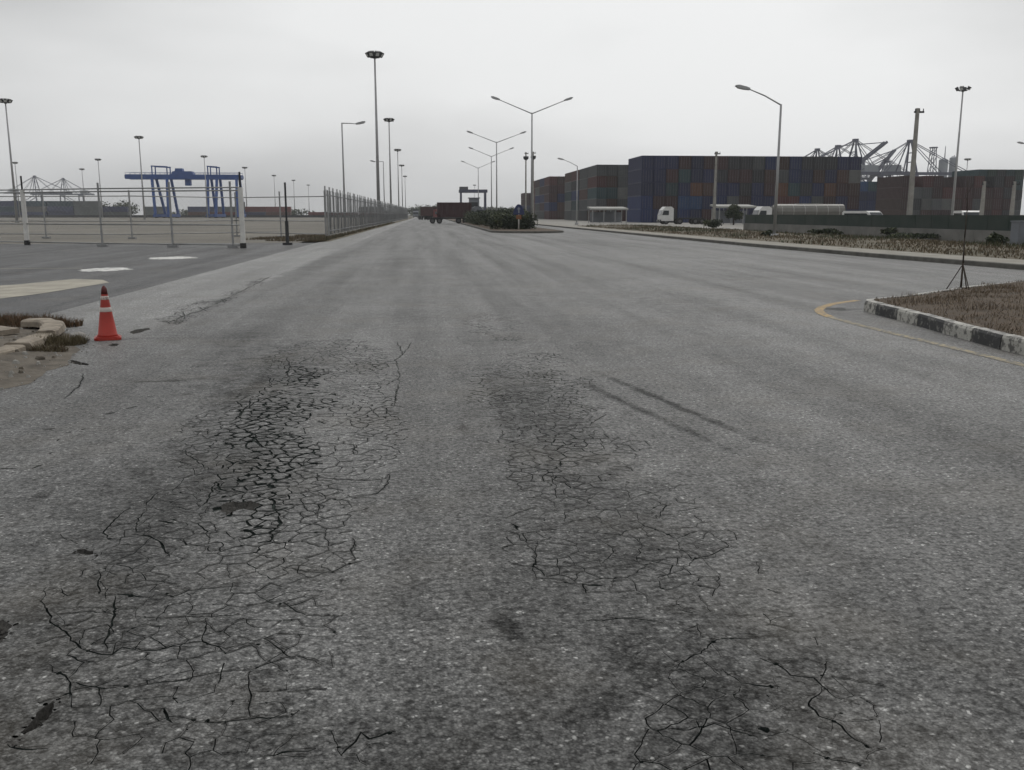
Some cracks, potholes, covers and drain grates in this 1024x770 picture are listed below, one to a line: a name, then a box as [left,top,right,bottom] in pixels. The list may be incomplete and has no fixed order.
crack [464,351,887,770]
pothole [221,501,259,515]
crack [0,339,411,770]
pothole [21,701,60,734]
